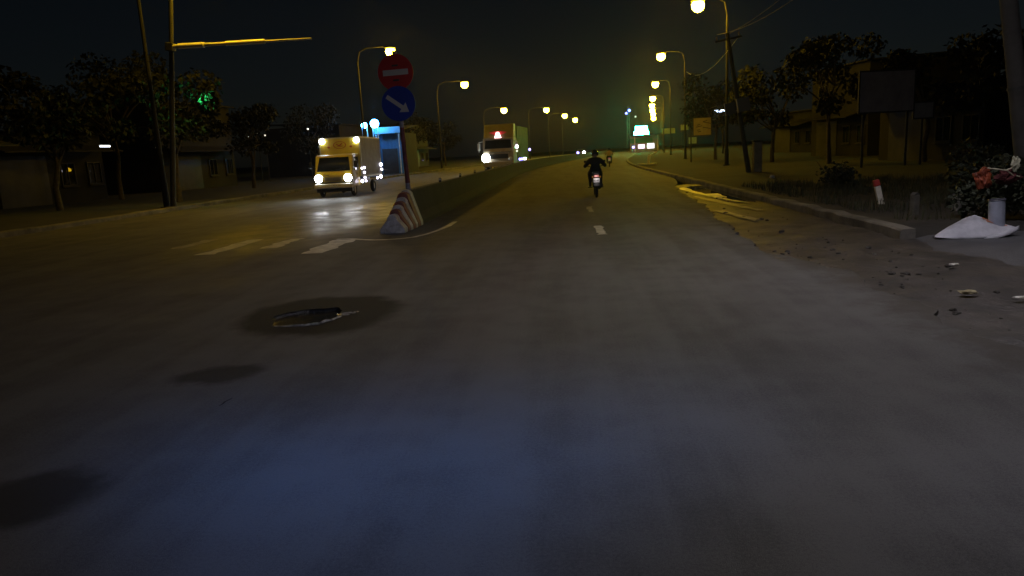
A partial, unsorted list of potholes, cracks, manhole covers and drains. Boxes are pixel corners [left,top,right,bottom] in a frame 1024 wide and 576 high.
pothole [272,308,359,327]
